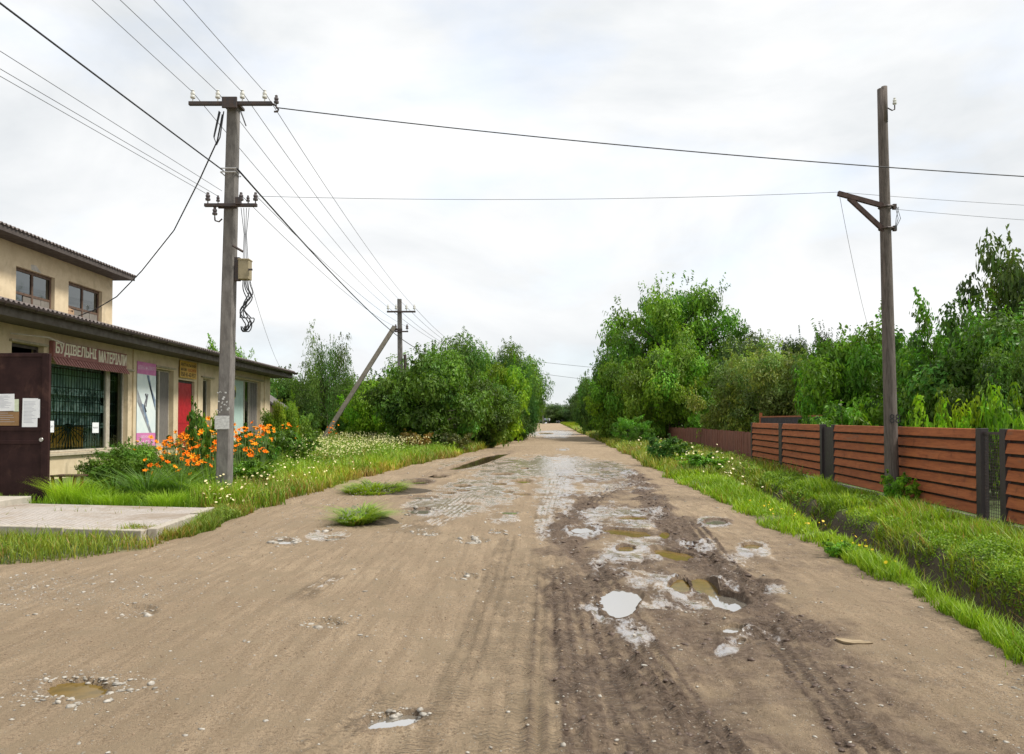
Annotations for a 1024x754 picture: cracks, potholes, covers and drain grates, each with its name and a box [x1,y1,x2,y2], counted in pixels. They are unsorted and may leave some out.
pothole [344,706,439,735]
pothole [662,573,694,597]
pothole [611,543,641,554]
pothole [418,449,523,476]
pothole [596,524,662,540]
pothole [266,537,302,546]
pothole [582,580,656,632]
pothole [0,665,165,715]
pothole [671,566,770,622]
pothole [696,517,735,527]
pothole [736,541,768,551]
